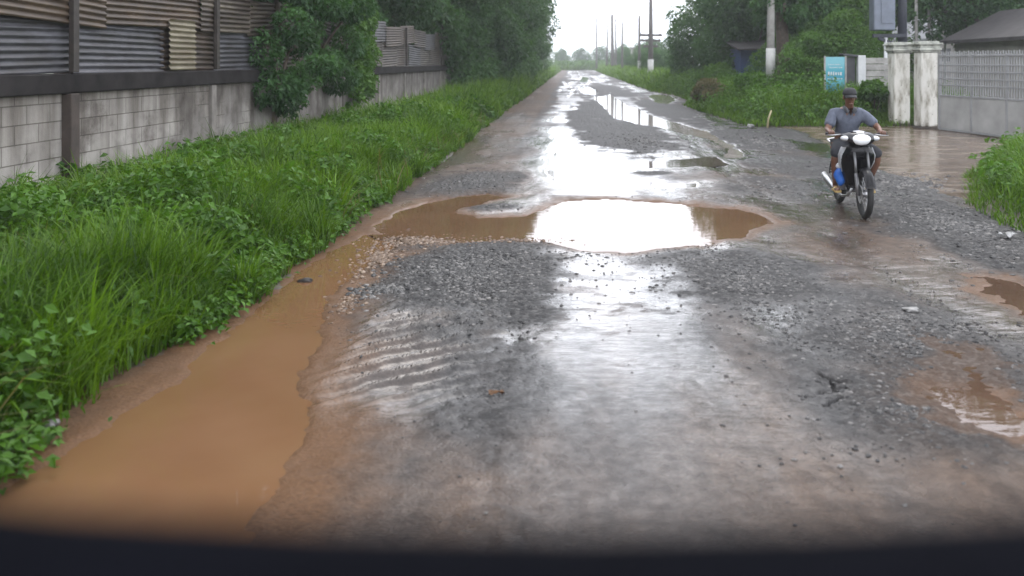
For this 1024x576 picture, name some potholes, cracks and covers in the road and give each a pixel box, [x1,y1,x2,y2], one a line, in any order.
pothole [876,333,1024,450]
pothole [959,269,1024,319]
pothole [356,189,792,256]
pothole [537,146,735,192]
